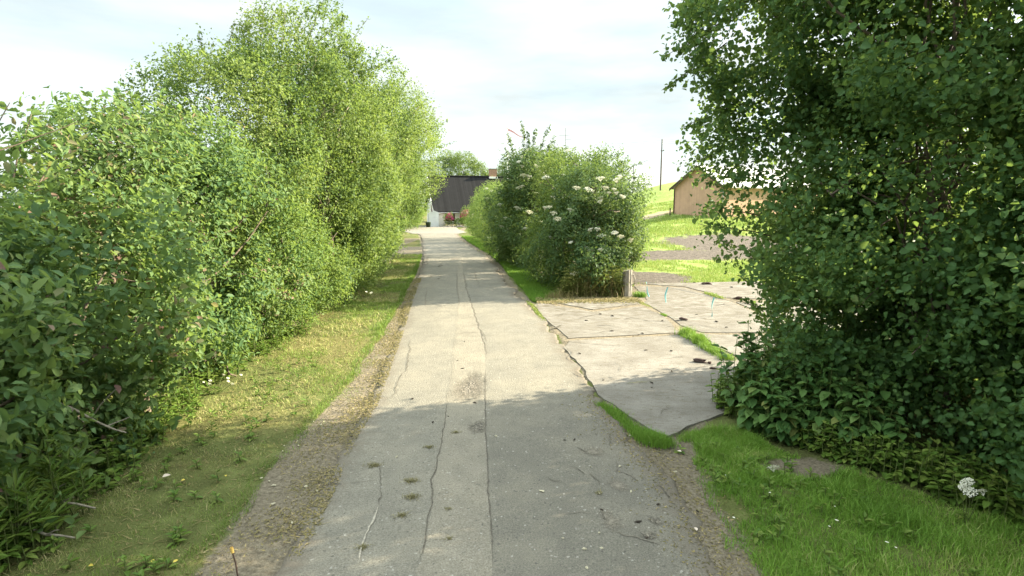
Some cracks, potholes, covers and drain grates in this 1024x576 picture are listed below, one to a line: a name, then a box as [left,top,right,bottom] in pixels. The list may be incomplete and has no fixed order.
crack [549,434,636,484]
crack [325,468,382,563]
crack [413,401,447,568]
